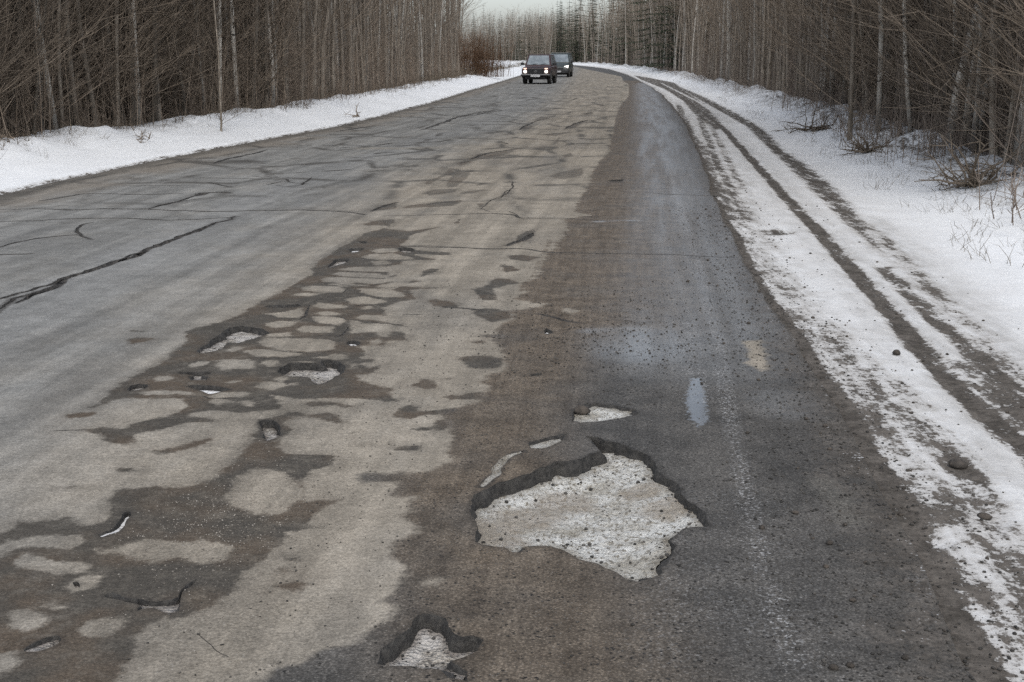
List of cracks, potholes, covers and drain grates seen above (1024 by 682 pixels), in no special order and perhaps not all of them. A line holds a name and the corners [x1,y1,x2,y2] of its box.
pothole [377,614,483,681]
pothole [470,436,709,582]
crack [0,98,729,309]
pothole [259,420,281,441]
pothole [277,360,346,385]
pothole [197,326,269,353]
pothole [98,511,131,537]
pothole [572,403,639,422]
pothole [104,581,195,613]
